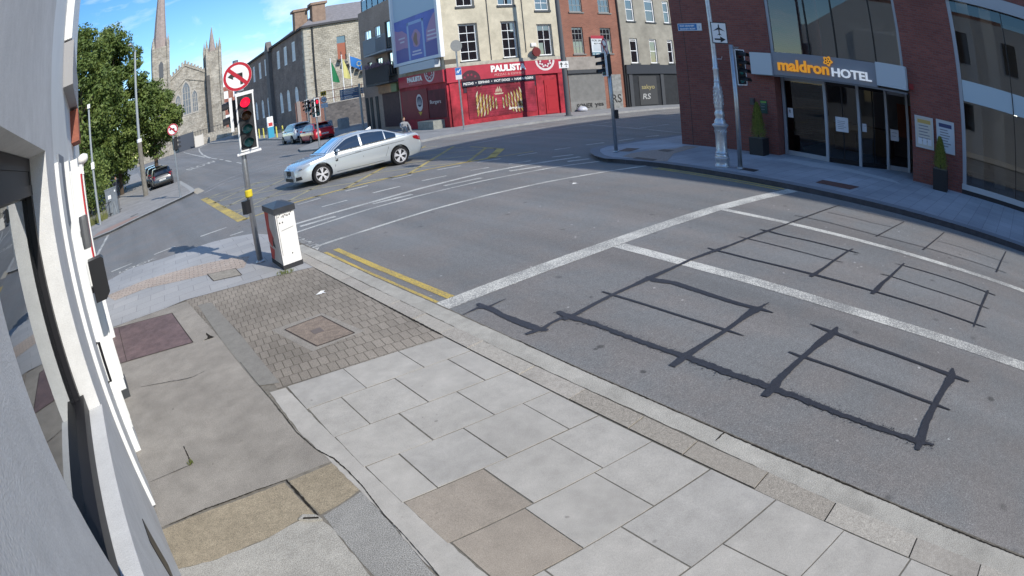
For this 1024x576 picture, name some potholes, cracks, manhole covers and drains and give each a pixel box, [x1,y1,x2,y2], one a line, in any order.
manhole cover [207,268,242,281]
manhole cover [284,315,355,346]
manhole cover [816,180,859,189]
